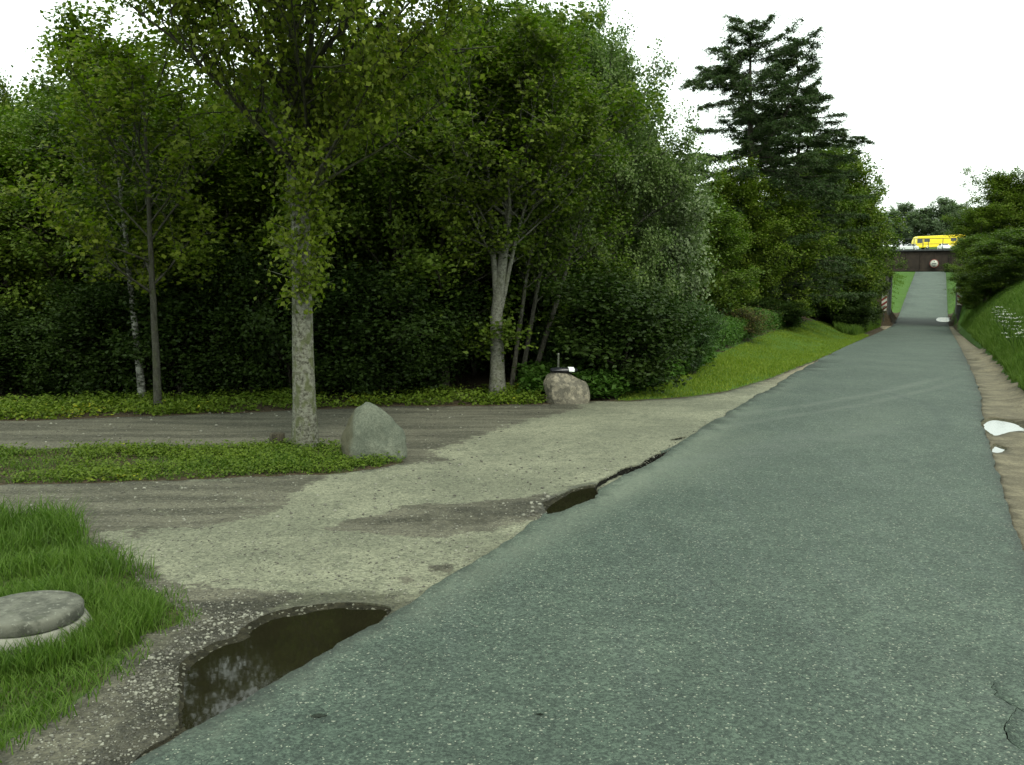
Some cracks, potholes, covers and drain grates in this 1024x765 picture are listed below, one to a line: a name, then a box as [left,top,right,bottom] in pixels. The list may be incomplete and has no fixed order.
crack [595,438,682,490]
pothole [141,602,391,757]
manhole cover [0,590,94,654]
pothole [541,485,598,514]
